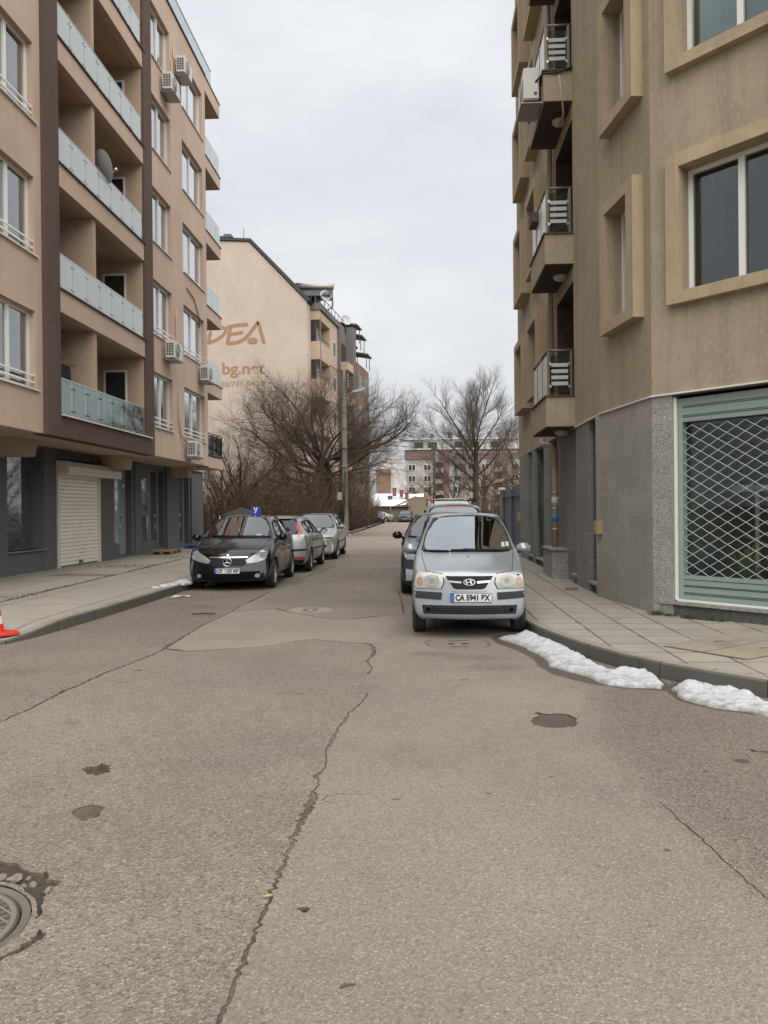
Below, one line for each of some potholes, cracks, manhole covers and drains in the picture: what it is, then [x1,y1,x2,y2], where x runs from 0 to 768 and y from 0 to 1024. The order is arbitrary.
crack [216,692,368,1024]
manhole cover [0,885,32,949]
manhole cover [424,638,492,650]
